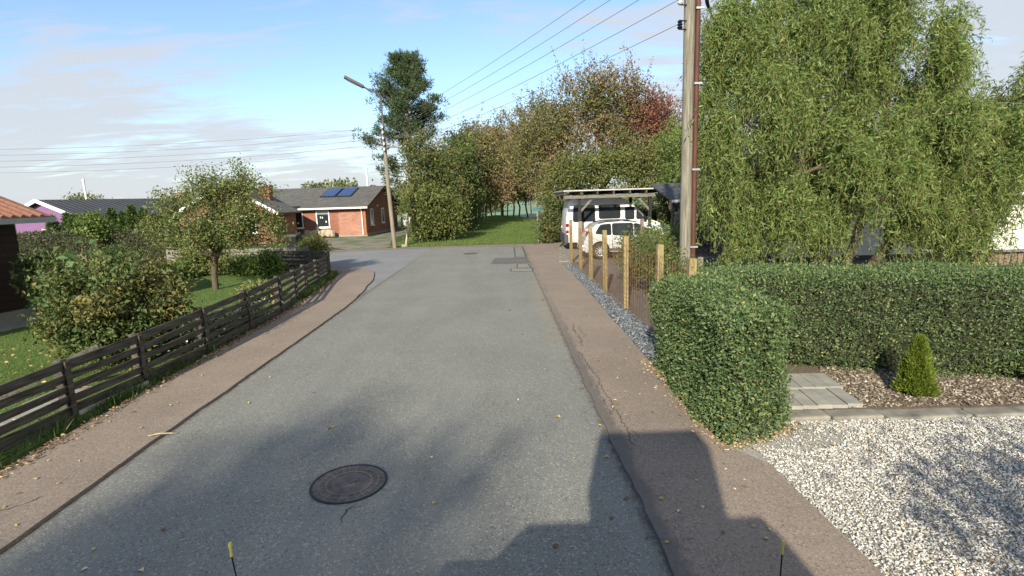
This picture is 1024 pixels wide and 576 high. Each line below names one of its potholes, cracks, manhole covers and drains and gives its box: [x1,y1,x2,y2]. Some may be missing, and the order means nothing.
manhole cover [309,464,387,504]
crack [566,324,640,447]
